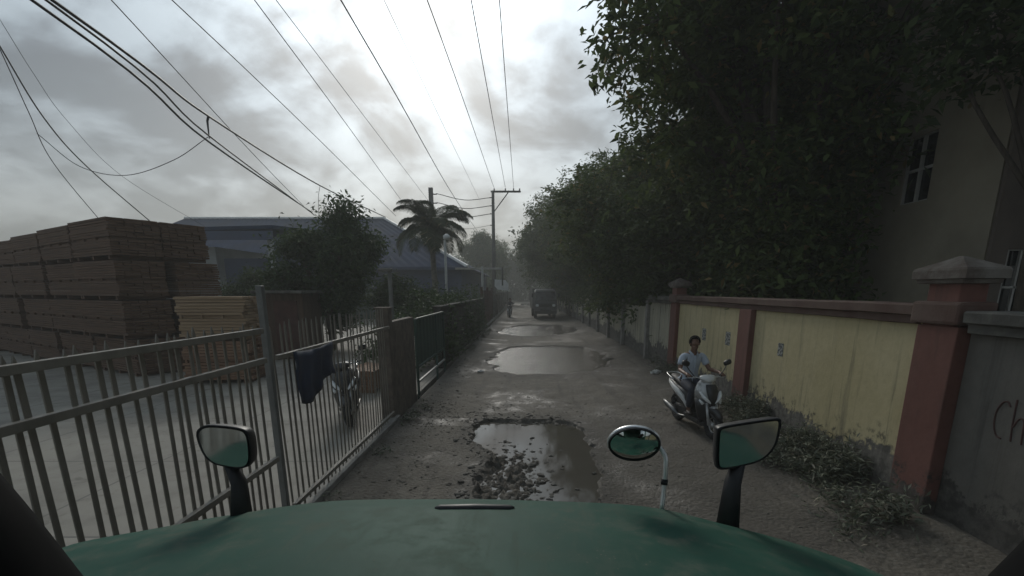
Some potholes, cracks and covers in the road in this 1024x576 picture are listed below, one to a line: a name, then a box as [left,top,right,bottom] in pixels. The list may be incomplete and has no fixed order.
pothole [485,345,616,375]
pothole [443,413,607,503]
pothole [494,325,581,336]
